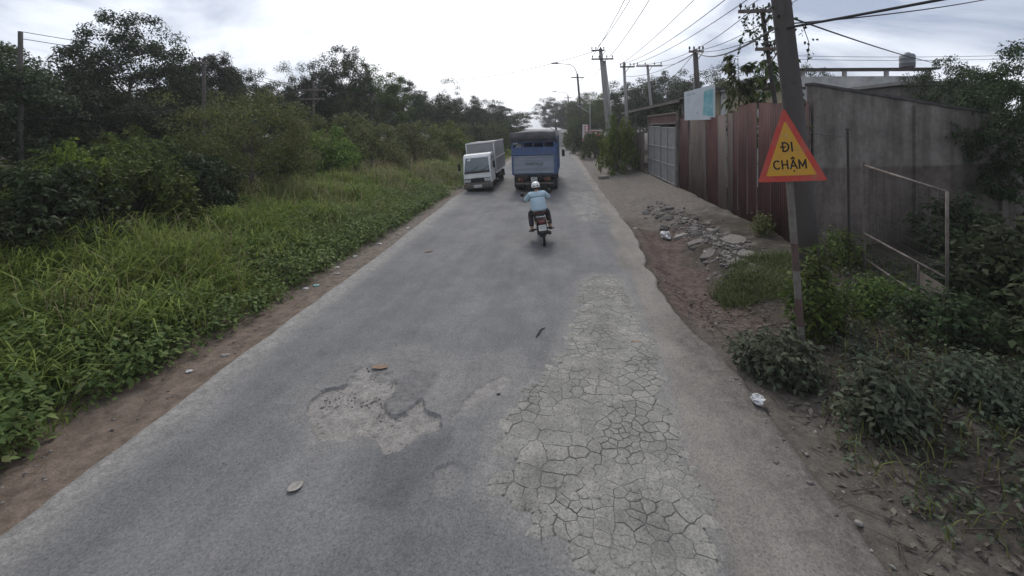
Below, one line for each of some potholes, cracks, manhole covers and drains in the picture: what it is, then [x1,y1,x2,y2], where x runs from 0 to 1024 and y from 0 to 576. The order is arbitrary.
crack [485,275,720,576]
pothole [304,361,443,455]
